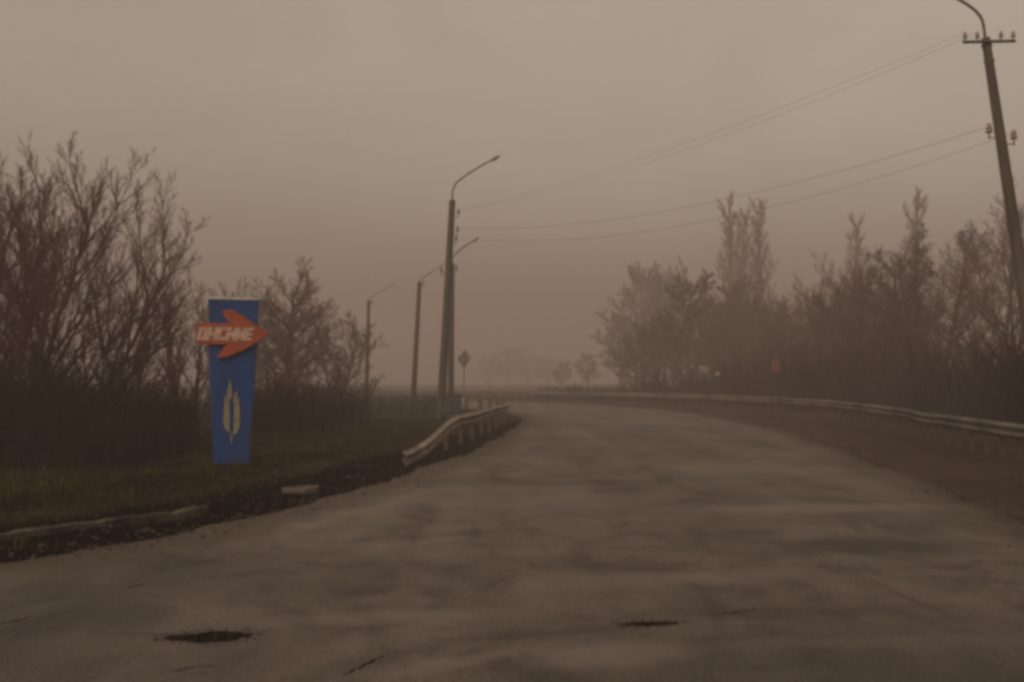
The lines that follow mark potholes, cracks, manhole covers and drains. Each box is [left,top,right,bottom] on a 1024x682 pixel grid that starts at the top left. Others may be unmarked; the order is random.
crack [343,656,383,675]
pothole [164,630,253,643]
